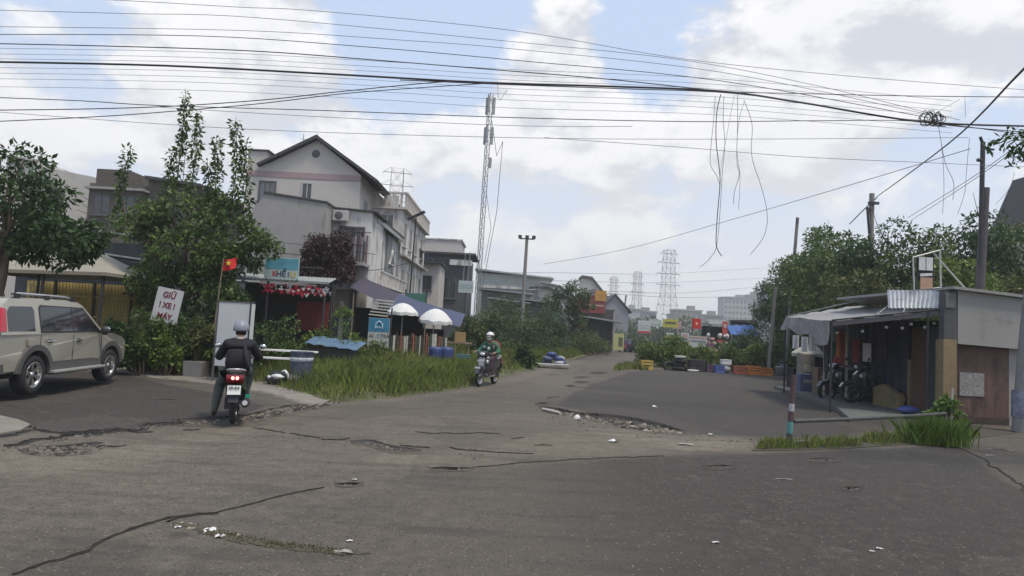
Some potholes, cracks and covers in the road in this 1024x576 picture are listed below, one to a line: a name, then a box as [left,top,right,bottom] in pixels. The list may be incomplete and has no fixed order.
crack [400,431,664,467]
pothole [19,441,104,456]
crack [0,418,200,447]
pothole [538,405,685,435]
pothole [334,480,364,488]
crack [253,427,350,440]
crack [13,486,324,574]
pothole [347,439,421,454]
